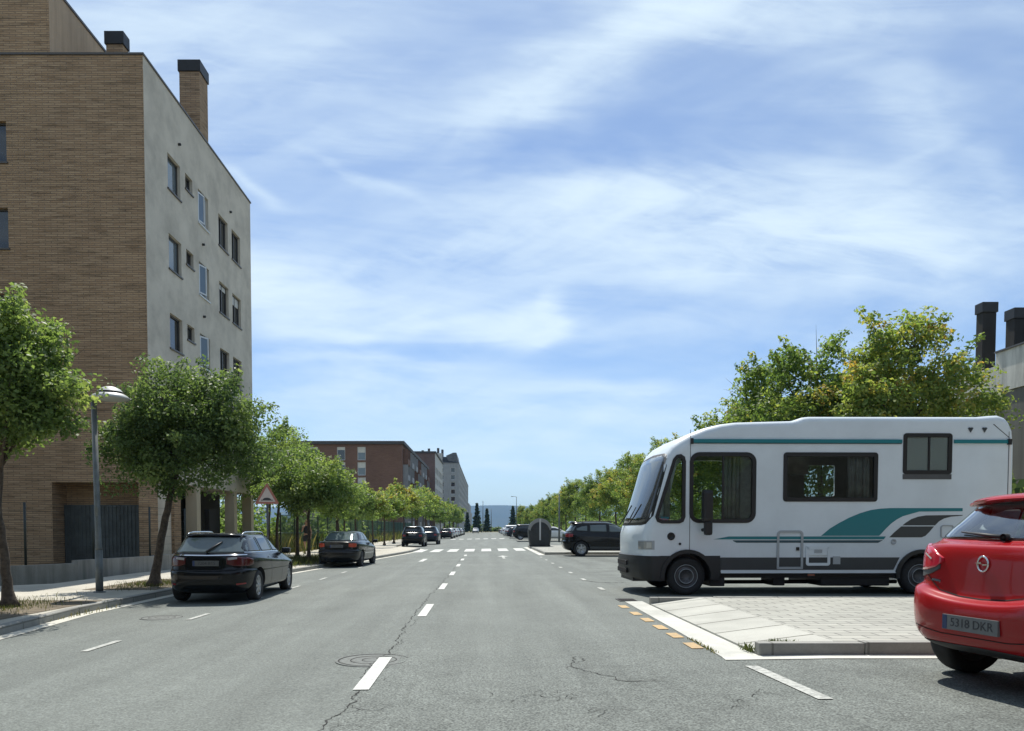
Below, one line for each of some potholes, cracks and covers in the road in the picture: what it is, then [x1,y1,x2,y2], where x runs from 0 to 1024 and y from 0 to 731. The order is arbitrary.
crack [318,558,462,731]
manhole cover [335,653,408,667]
